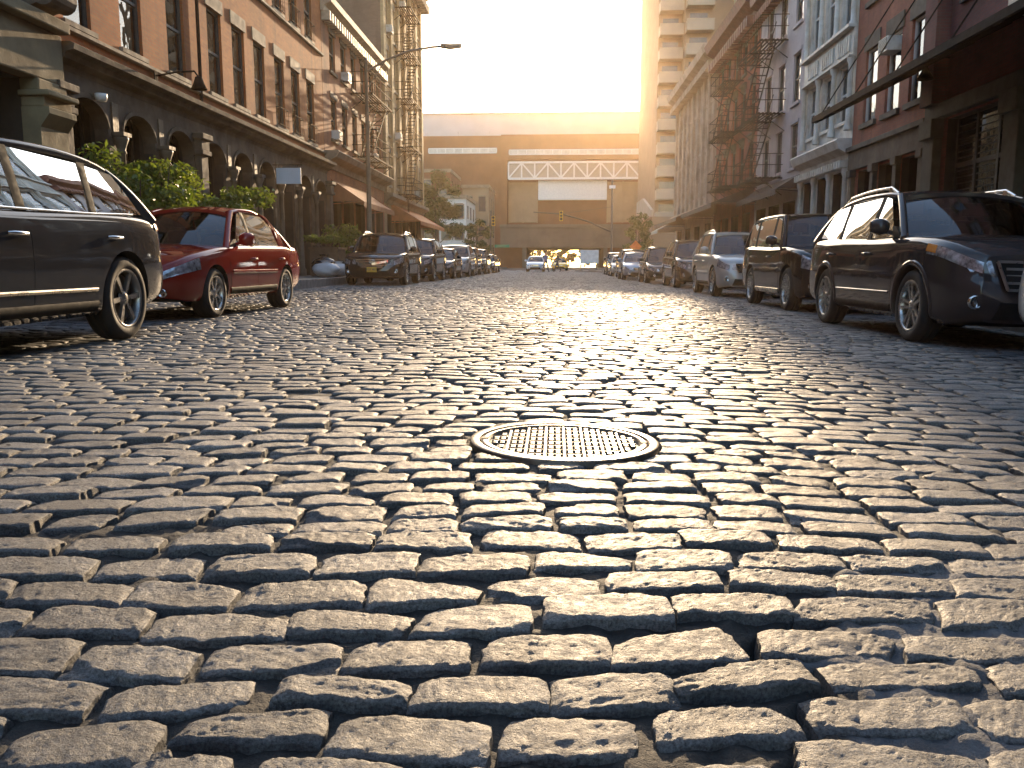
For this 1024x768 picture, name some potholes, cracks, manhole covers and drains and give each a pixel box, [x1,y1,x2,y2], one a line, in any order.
manhole cover [469,422,659,468]
